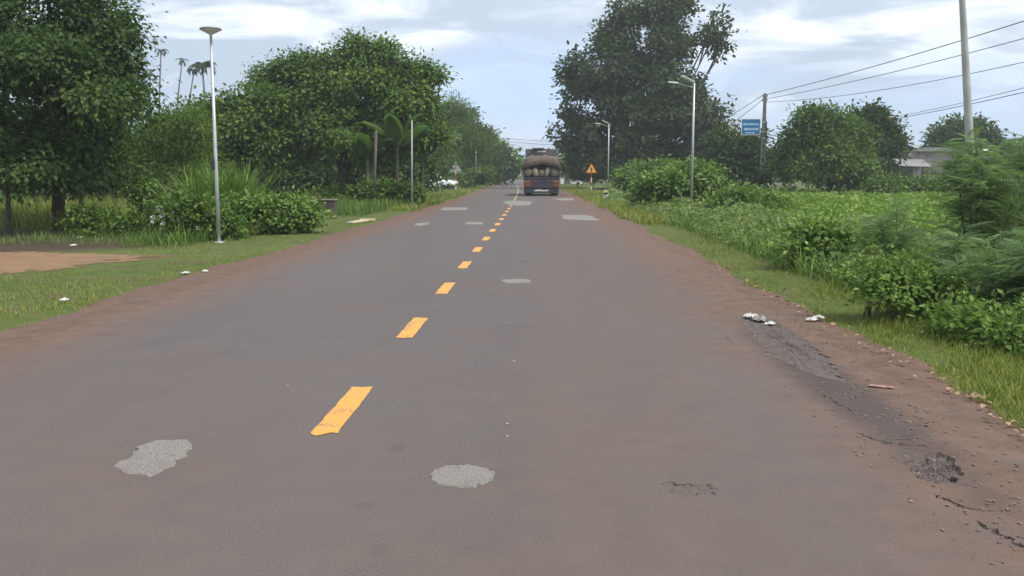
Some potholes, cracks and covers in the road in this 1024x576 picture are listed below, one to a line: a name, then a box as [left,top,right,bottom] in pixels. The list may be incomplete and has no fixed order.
crack [854,431,935,447]
pothole [903,452,964,484]
crack [935,494,1024,548]
pothole [658,481,719,496]
